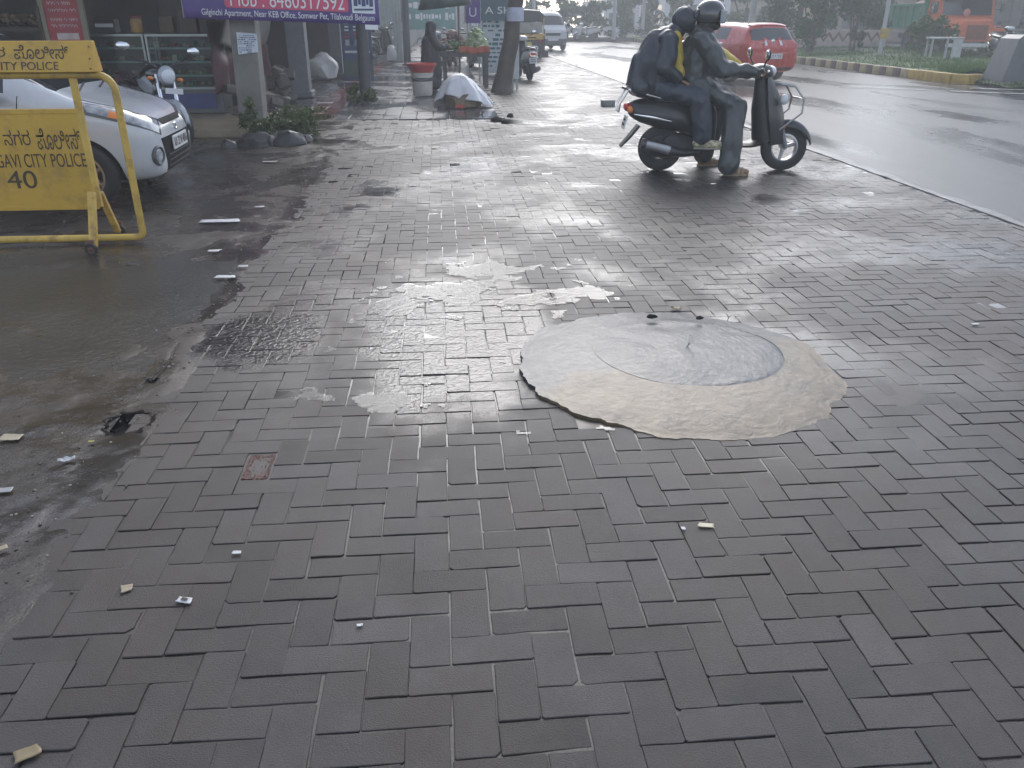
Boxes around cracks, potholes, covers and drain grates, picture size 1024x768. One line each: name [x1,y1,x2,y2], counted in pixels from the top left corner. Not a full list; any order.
pothole [100,409,157,437]
manhole cover [519,312,848,441]
